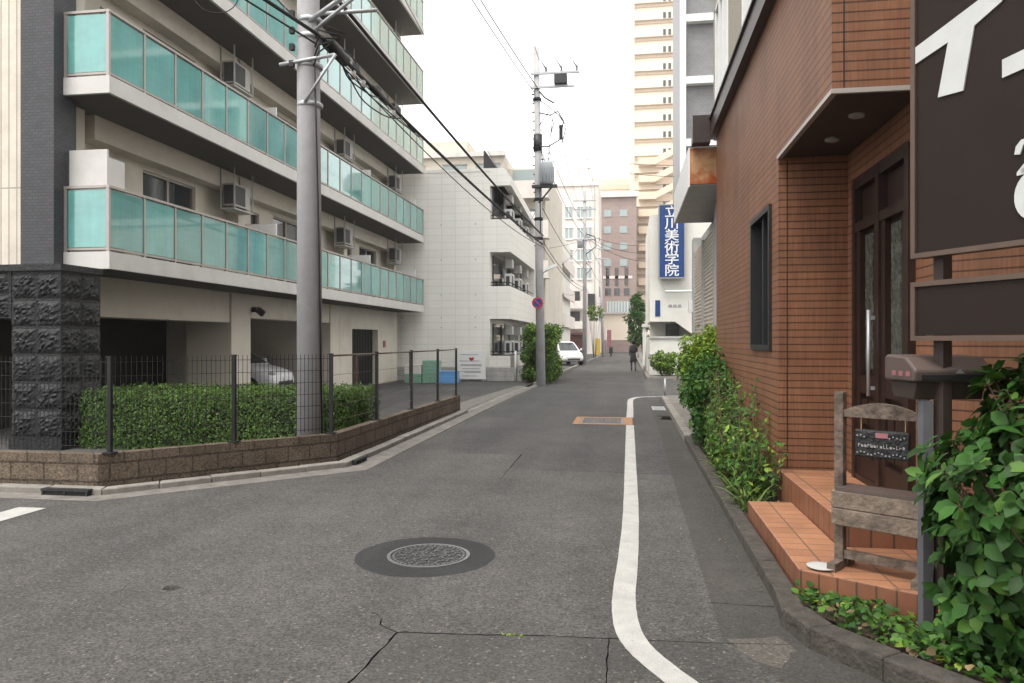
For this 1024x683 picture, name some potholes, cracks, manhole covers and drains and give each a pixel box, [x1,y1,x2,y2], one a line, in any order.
drain grate [40,487,93,497]
crack [347,612,788,683]
manhole cover [387,544,470,568]
